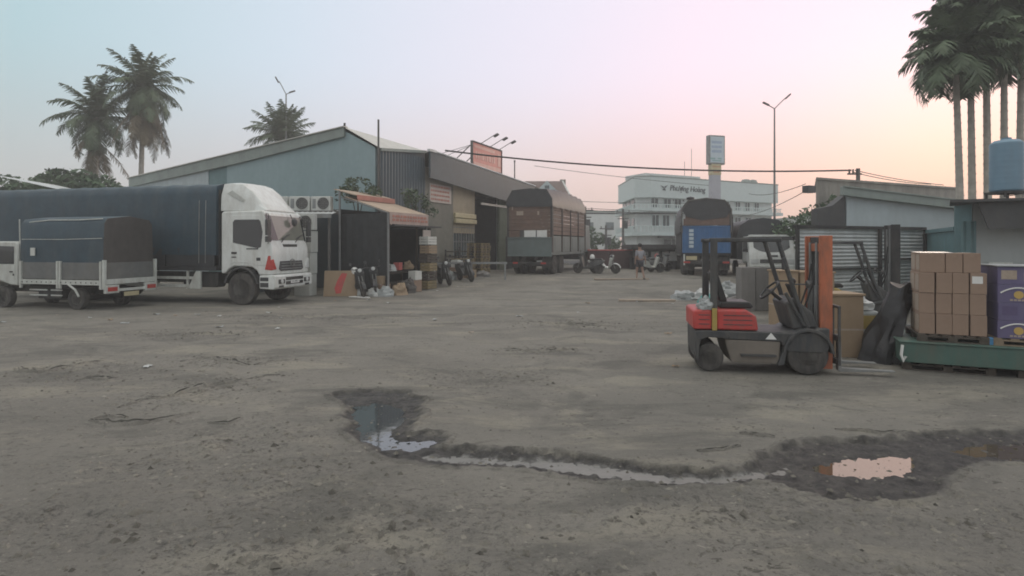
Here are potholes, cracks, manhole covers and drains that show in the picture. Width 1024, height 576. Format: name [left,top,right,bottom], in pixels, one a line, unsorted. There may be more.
pothole [397,441,773,489]
pothole [323,387,457,462]
pothole [747,427,1024,506]
